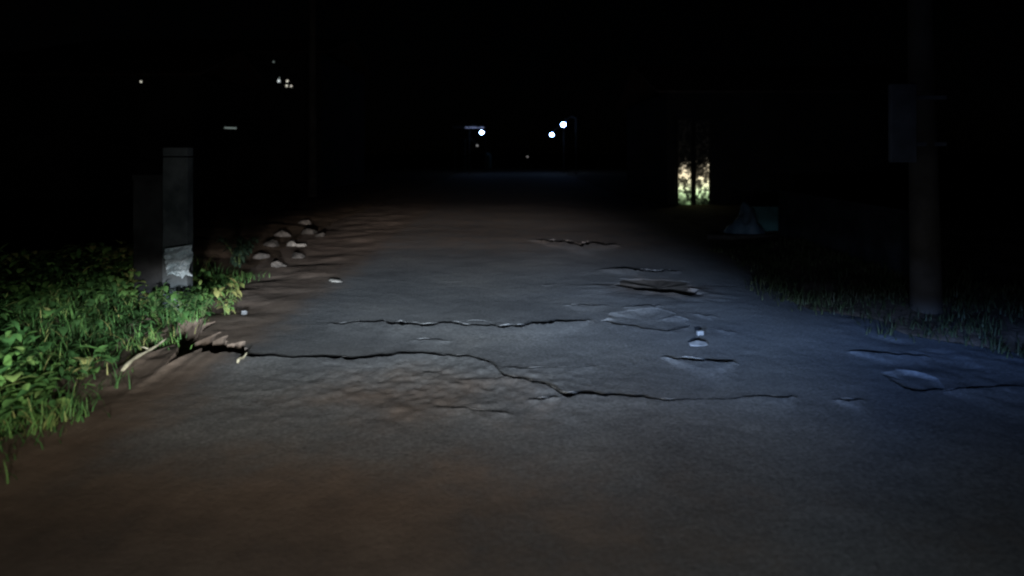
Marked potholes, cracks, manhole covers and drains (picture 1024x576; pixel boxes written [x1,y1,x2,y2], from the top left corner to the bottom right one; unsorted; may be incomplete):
crack [127,293,797,415]
